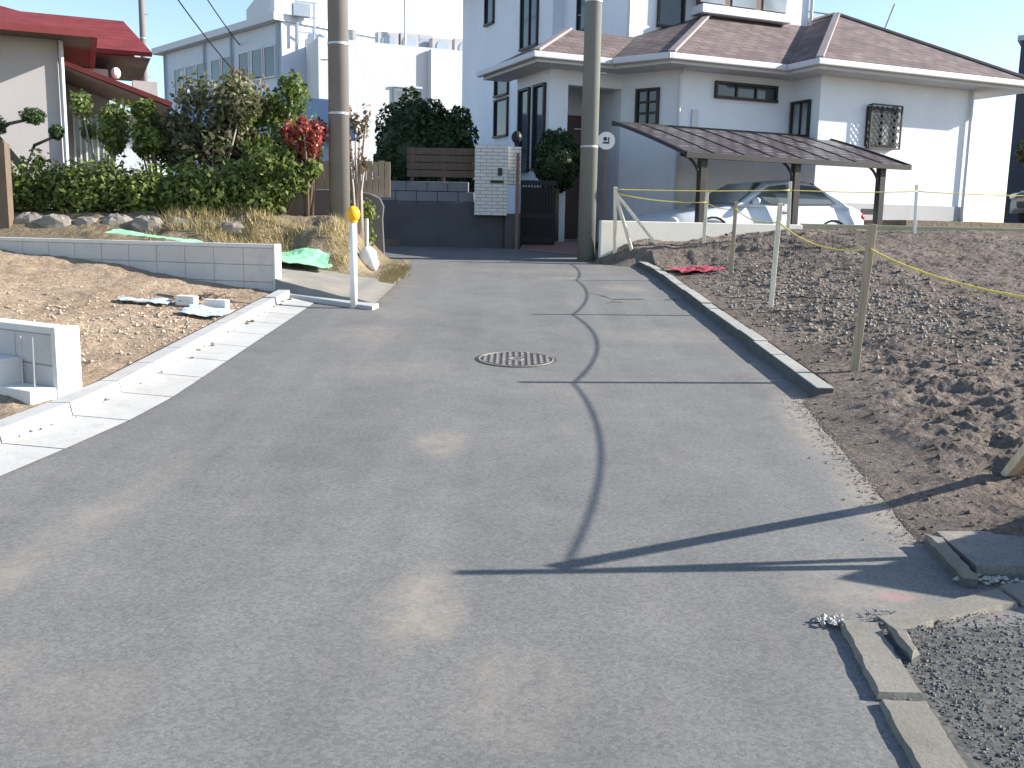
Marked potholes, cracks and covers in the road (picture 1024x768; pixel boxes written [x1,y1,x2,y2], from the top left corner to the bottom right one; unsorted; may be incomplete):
manhole cover [476,351,557,368]
